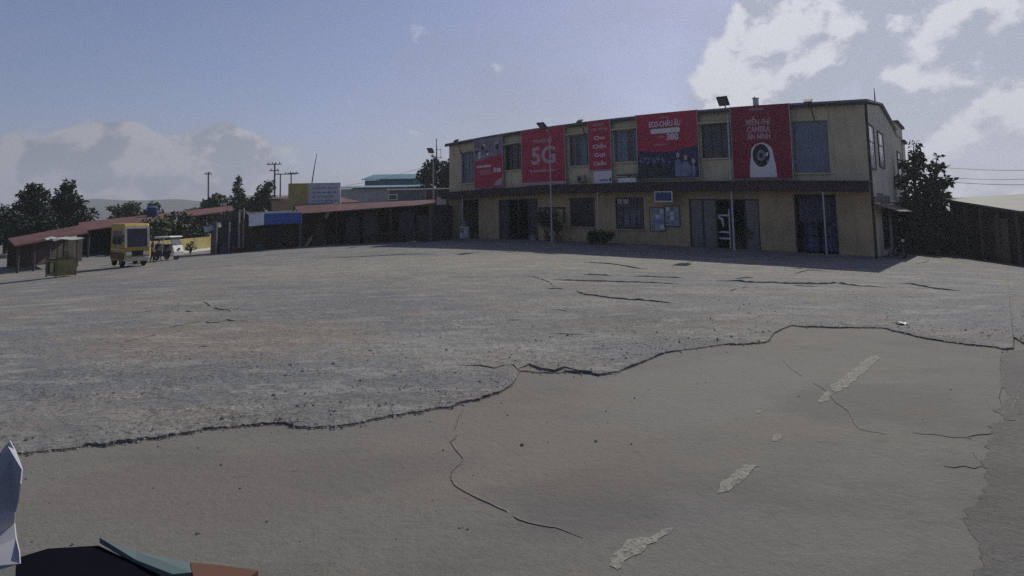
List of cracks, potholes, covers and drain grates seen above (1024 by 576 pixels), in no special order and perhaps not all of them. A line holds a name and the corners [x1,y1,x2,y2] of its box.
crack [20,326,1011,538]
crack [905,283,960,291]
crack [128,301,239,347]
crack [513,262,681,335]
crack [717,270,885,291]
